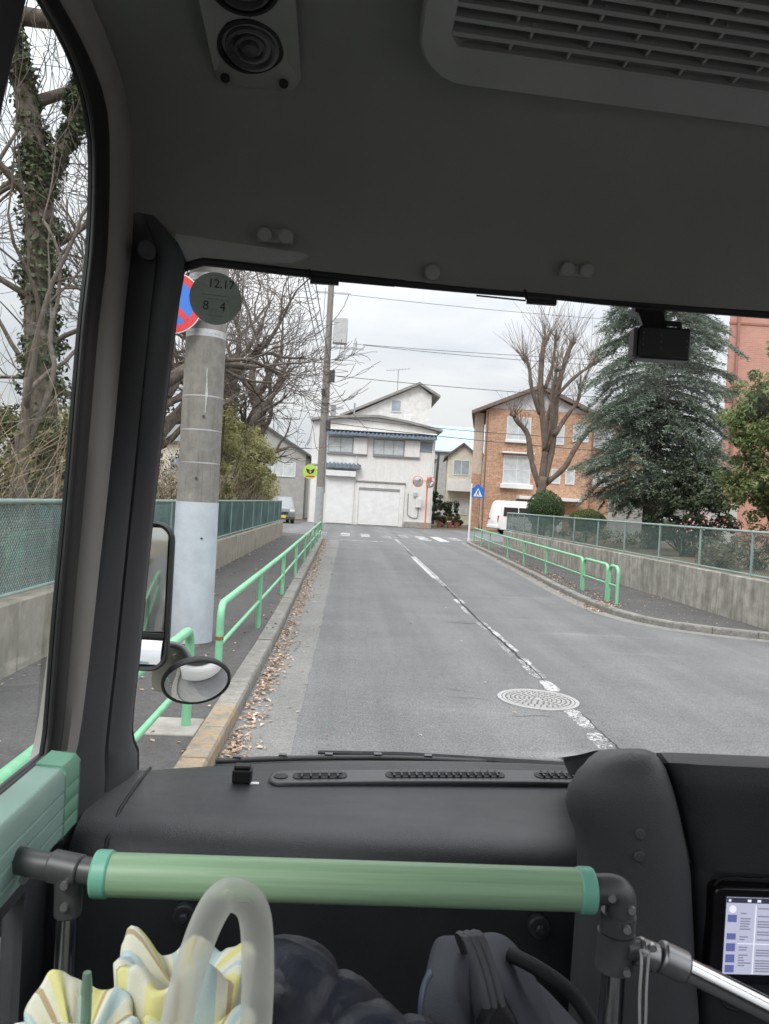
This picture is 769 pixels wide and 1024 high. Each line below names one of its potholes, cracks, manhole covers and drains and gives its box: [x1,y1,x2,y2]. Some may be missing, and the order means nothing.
manhole cover [497,689,580,711]
